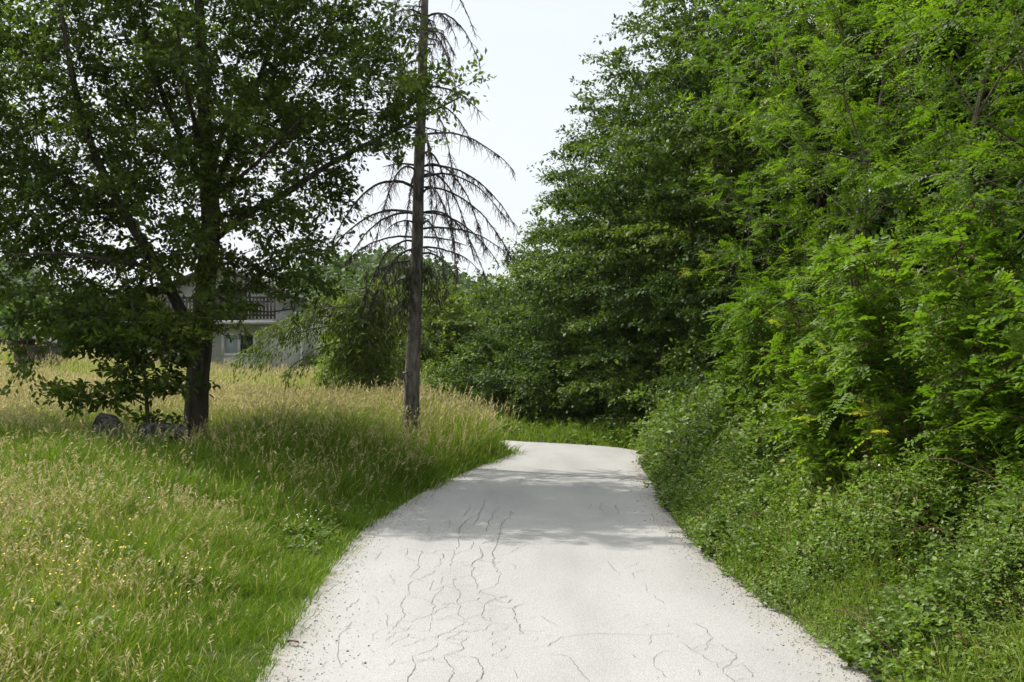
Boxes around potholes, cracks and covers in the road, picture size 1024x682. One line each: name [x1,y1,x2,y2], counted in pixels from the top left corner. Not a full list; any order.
crack [371,478,555,682]
crack [547,623,753,682]
